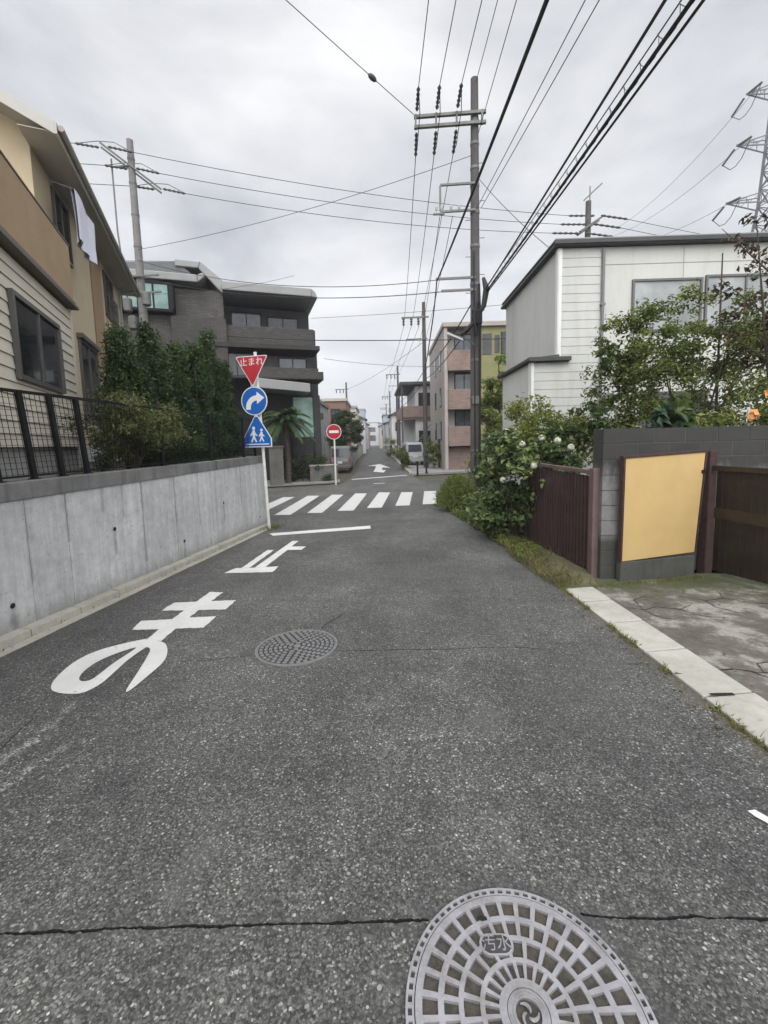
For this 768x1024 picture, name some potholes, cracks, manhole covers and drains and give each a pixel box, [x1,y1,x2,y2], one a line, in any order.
crack [0,913,768,936]
crack [721,662,768,677]
manhole cover [255,629,338,667]
crack [628,594,763,622]
manhole cover [405,888,658,1024]
